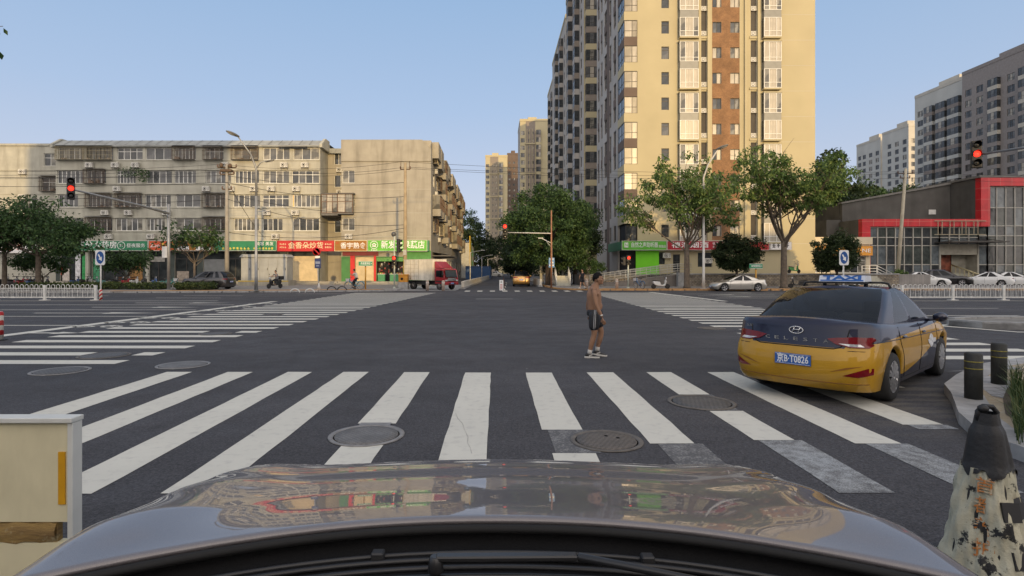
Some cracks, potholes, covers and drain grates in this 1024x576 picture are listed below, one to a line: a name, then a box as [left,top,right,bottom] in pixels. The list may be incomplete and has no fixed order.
manhole cover [328,423,405,447]
manhole cover [155,361,211,370]
manhole cover [570,430,644,453]
manhole cover [667,394,737,411]
manhole cover [27,366,92,376]
